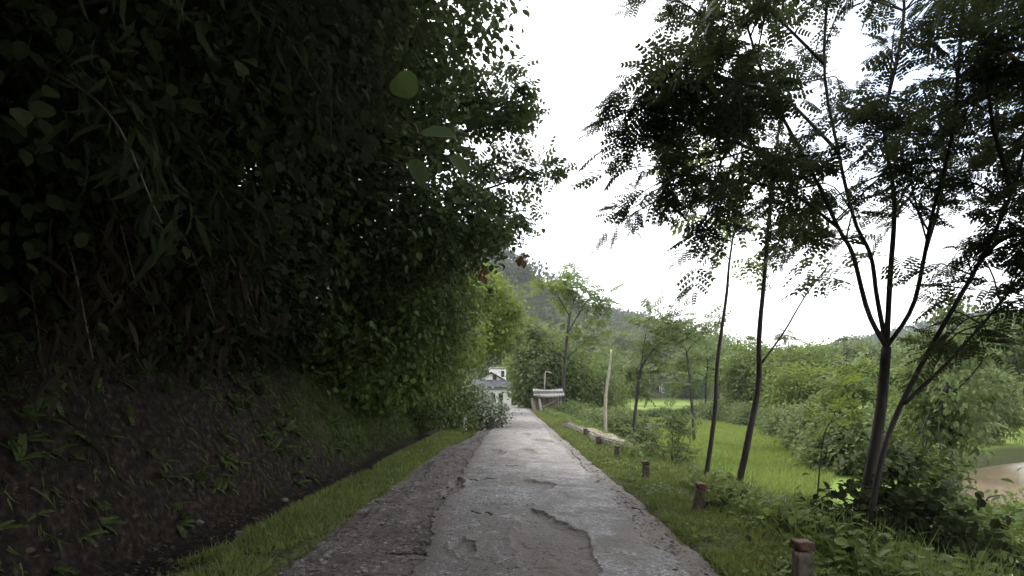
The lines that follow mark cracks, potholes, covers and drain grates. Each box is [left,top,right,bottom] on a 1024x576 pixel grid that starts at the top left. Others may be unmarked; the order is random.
pothole [511,508,603,576]
pothole [450,536,477,555]
